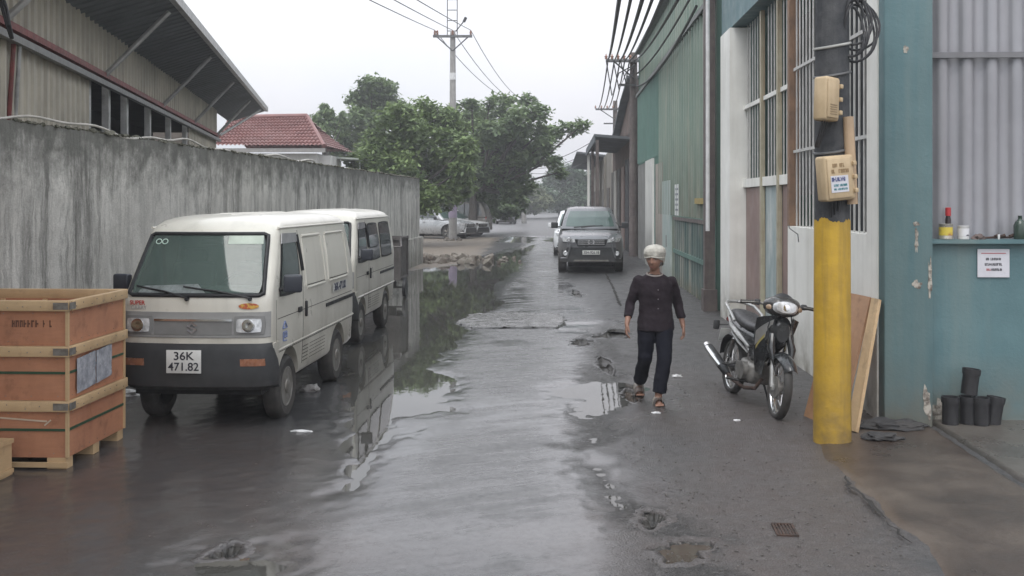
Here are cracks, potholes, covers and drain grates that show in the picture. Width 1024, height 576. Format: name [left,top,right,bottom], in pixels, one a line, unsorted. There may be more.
crack [844,476,912,543]
pothole [593,355,616,376]
pothole [191,538,256,563]
pothole [636,535,725,568]
pothole [629,506,678,532]
pothole [566,338,599,347]
pothole [588,328,637,339]
drain grate [771,522,799,537]
